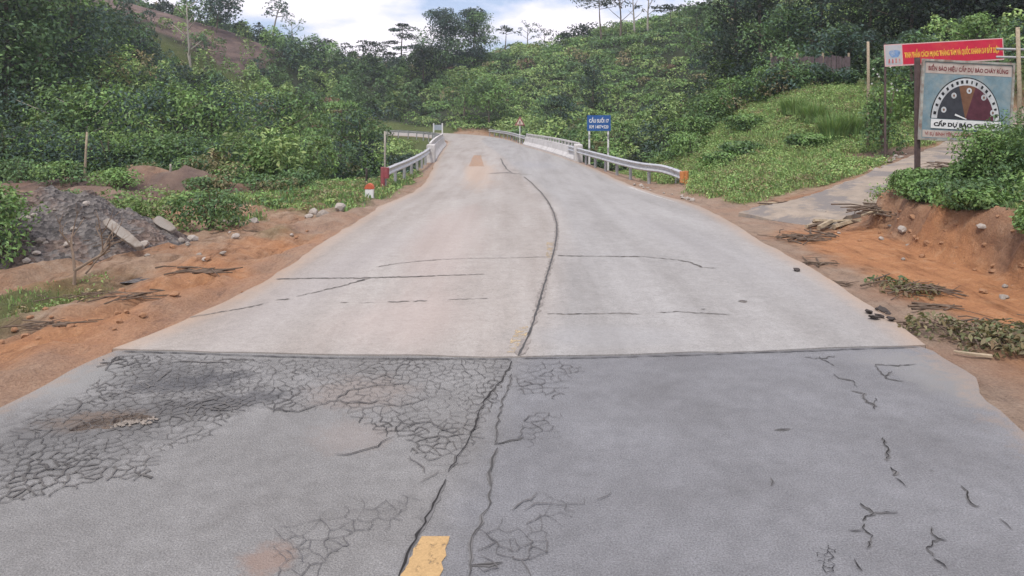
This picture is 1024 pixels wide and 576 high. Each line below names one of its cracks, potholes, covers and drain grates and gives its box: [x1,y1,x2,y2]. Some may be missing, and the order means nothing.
crack [881,438,905,485]
crack [809,356,913,409]
pothole [69,413,156,431]
crack [926,527,946,567]
crack [816,545,836,572]
crack [192,158,747,576]
crack [0,354,269,502]
crack [961,485,979,507]
crack [849,503,897,570]
